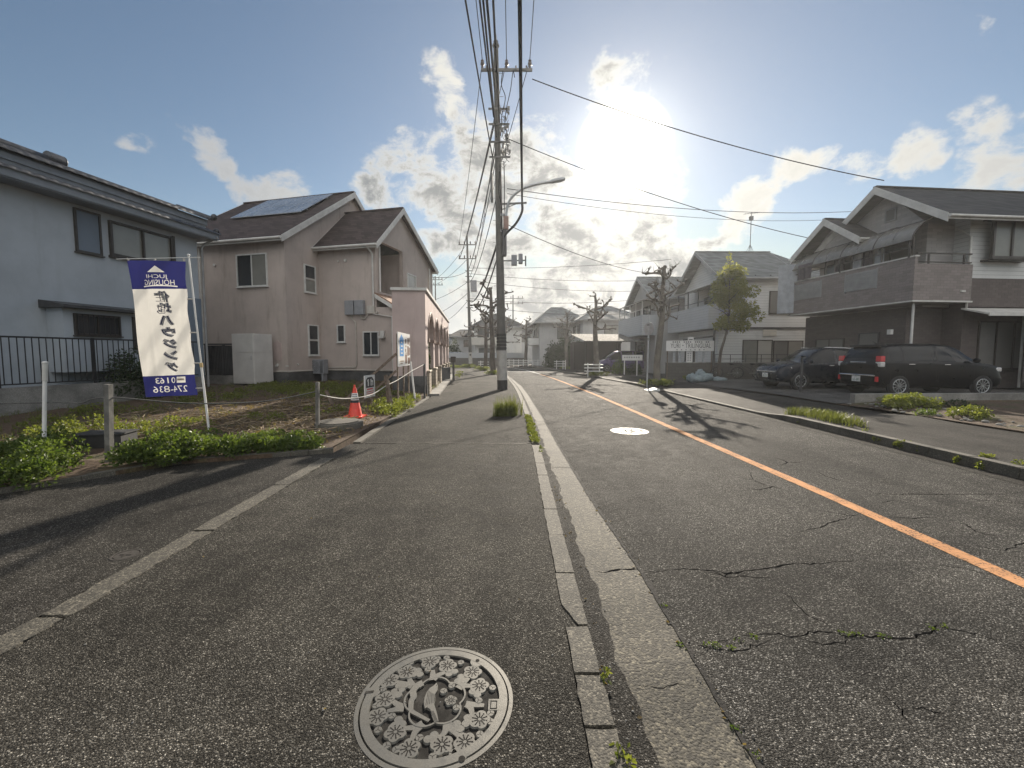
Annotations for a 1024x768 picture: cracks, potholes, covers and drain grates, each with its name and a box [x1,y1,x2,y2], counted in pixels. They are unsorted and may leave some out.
manhole cover [353,647,513,768]
utility cover [109,549,143,561]
crack [911,512,1024,551]
crack [696,590,1024,652]
crack [644,561,852,578]
crack [801,510,856,532]
crack [886,696,954,727]
